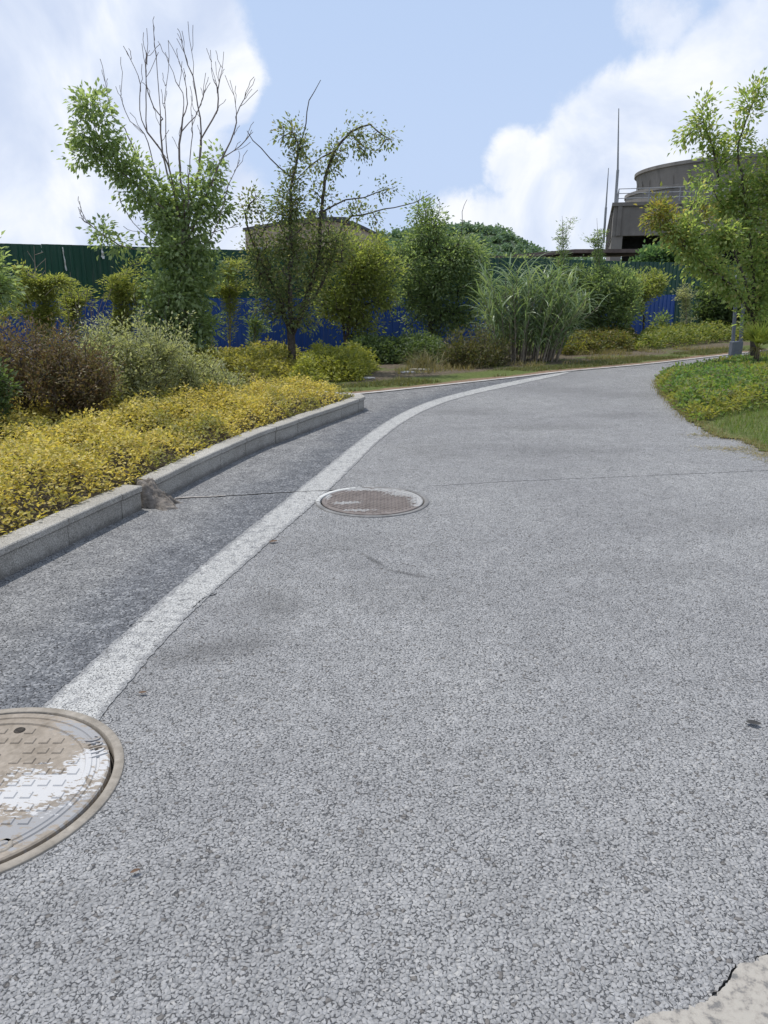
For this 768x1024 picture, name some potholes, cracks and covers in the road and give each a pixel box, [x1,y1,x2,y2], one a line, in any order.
manhole cover [316,486,429,518]
manhole cover [0,707,124,874]
